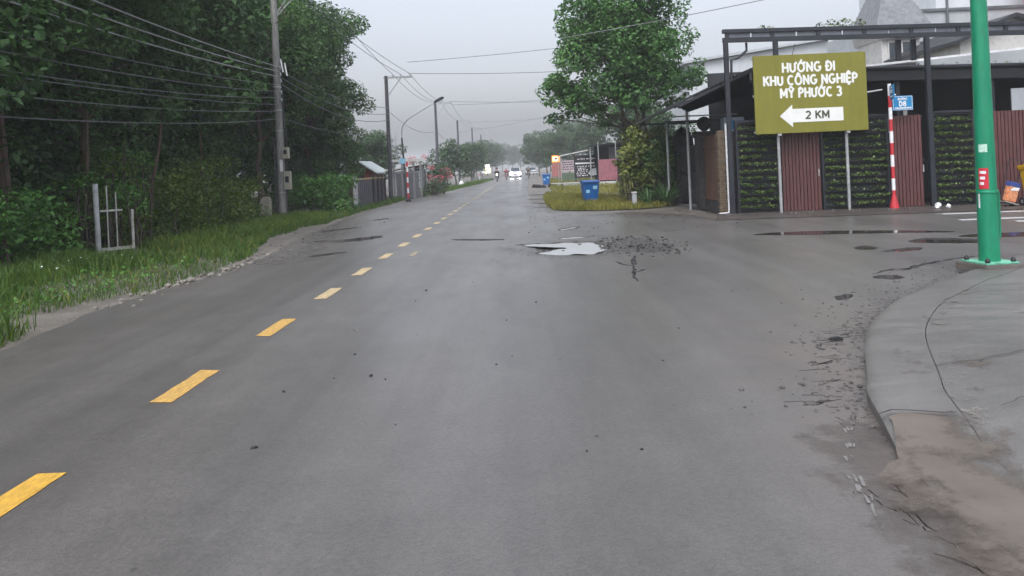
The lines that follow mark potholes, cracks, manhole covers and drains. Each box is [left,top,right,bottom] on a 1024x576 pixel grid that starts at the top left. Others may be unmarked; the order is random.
pothole [314,235,383,243]
crack [788,326,853,408]
pothole [519,241,611,255]
crack [871,256,974,274]
crack [864,480,989,576]
crack [617,256,645,281]
